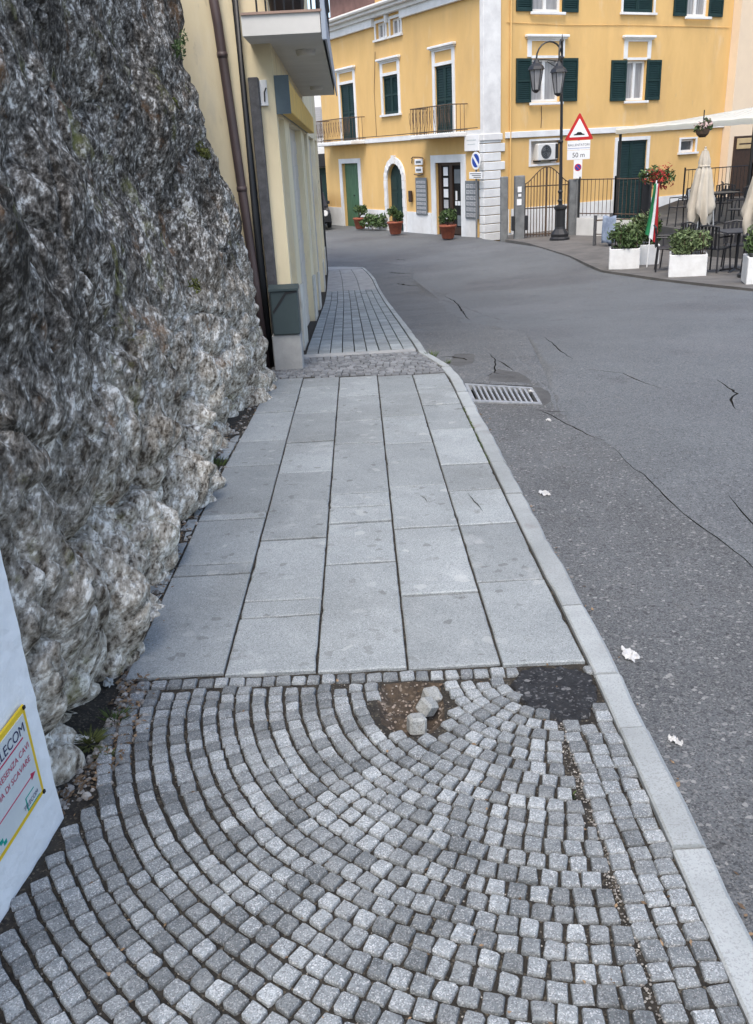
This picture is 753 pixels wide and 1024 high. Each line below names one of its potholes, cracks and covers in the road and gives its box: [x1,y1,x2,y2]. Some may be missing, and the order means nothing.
drain grate [465,383,542,405]
crack [539,410,605,441]
crack [719,381,739,408]
pothole [377,682,445,737]
